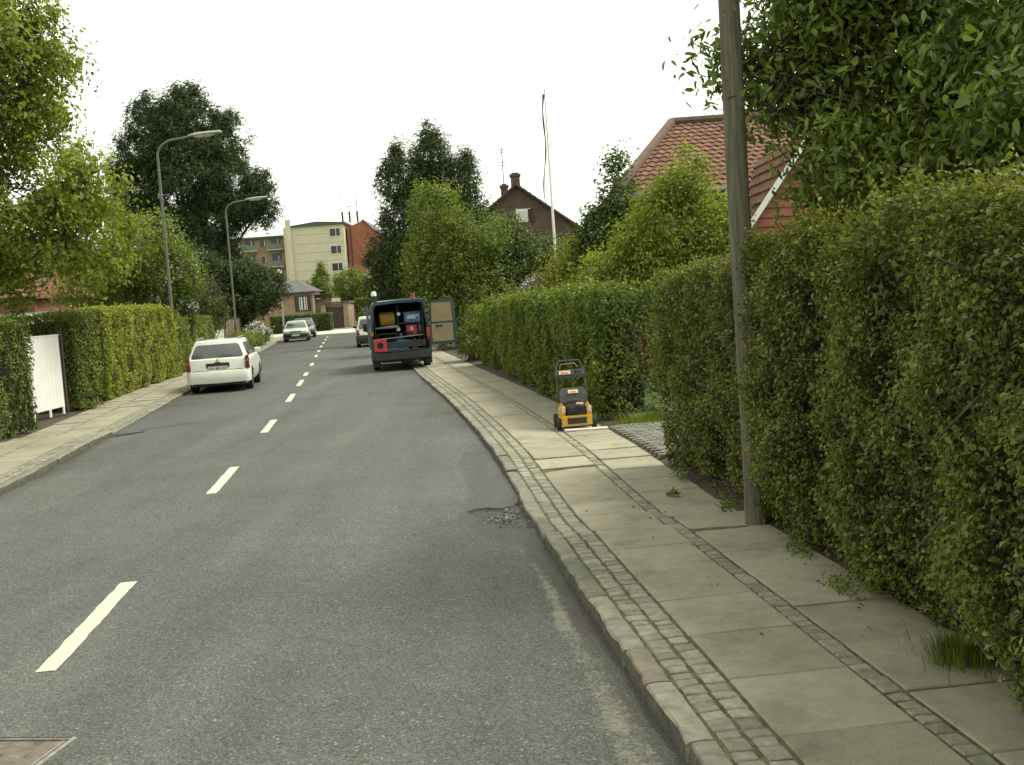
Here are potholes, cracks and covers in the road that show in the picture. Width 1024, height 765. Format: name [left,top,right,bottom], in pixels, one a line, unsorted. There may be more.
manhole cover [0,737,77,765]
pothole [466,502,533,532]
